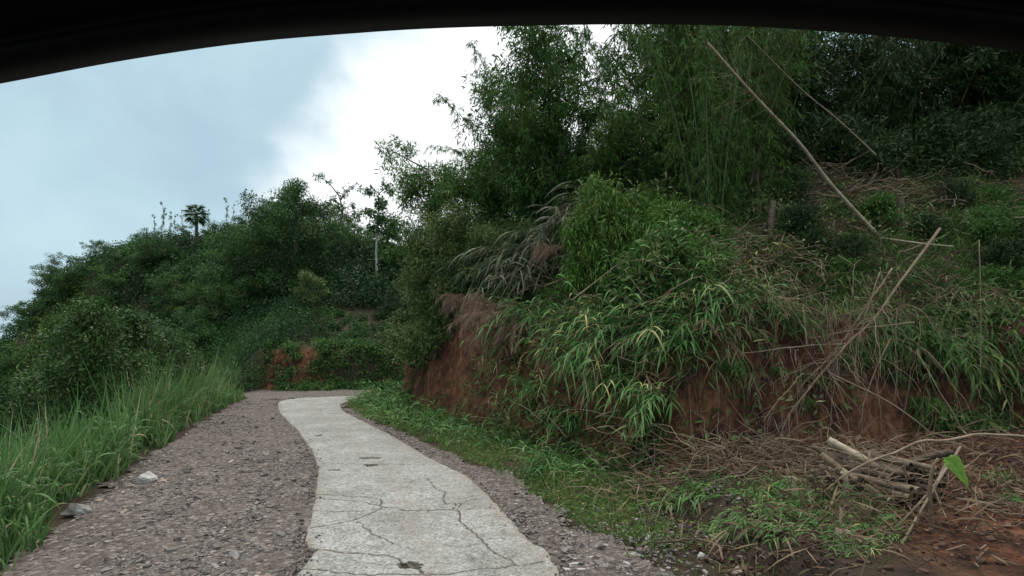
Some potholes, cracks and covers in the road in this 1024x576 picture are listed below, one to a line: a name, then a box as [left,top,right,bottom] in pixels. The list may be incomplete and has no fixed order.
crack [303,478,545,576]
pothole [396,561,423,569]
